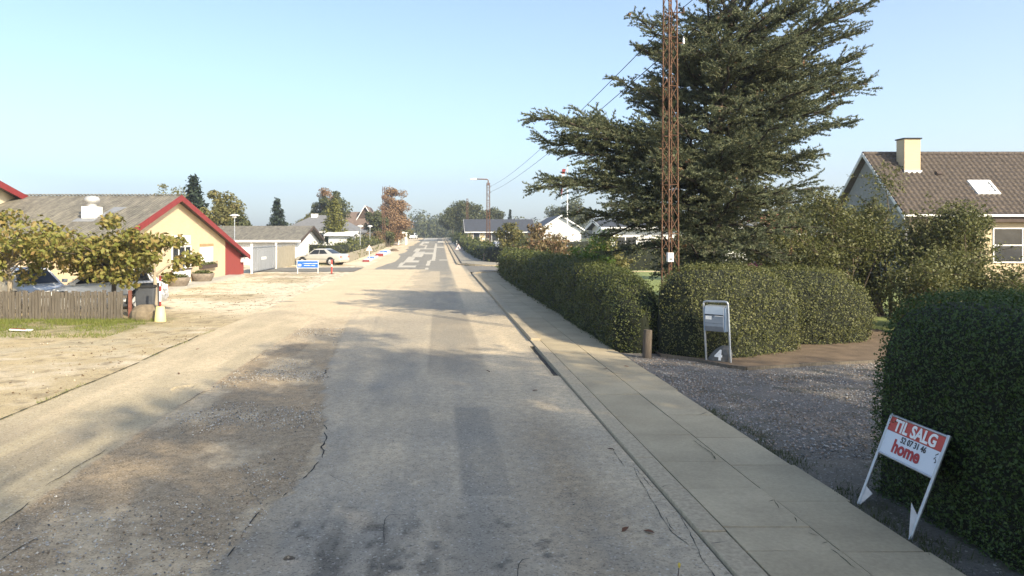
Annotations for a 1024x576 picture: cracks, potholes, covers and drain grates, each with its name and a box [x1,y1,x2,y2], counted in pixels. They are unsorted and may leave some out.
crack [227,425,346,557]
crack [613,449,725,576]
